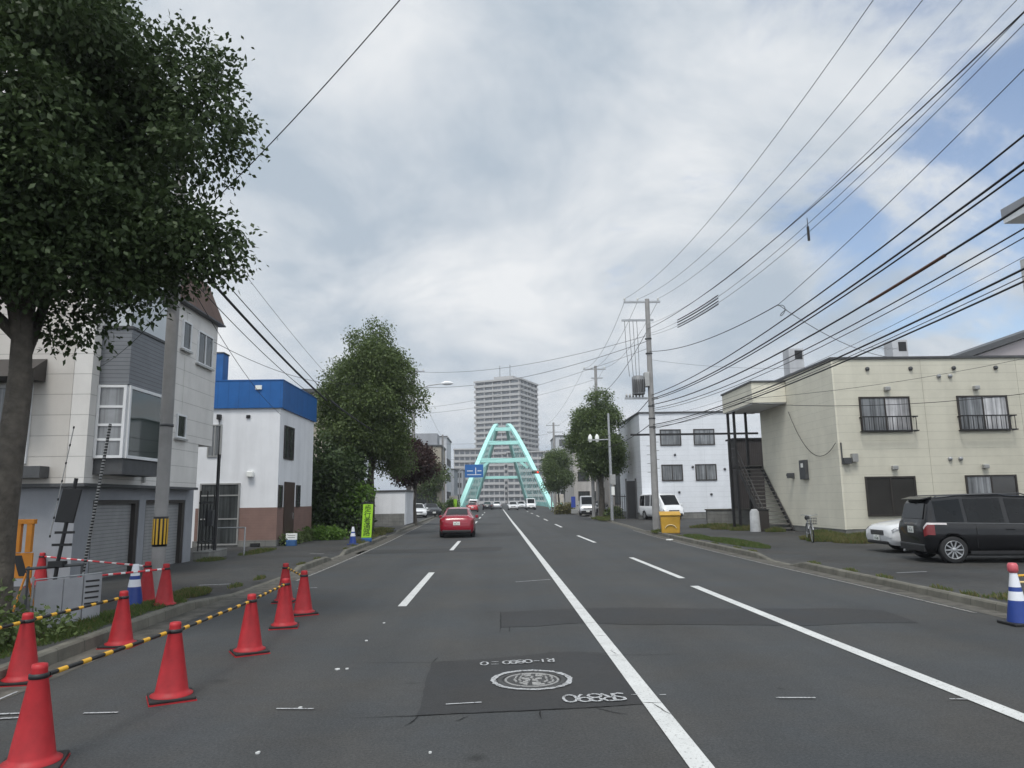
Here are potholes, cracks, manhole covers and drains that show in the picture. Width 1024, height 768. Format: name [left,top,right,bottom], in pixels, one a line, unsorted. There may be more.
manhole cover [490,669,573,690]
